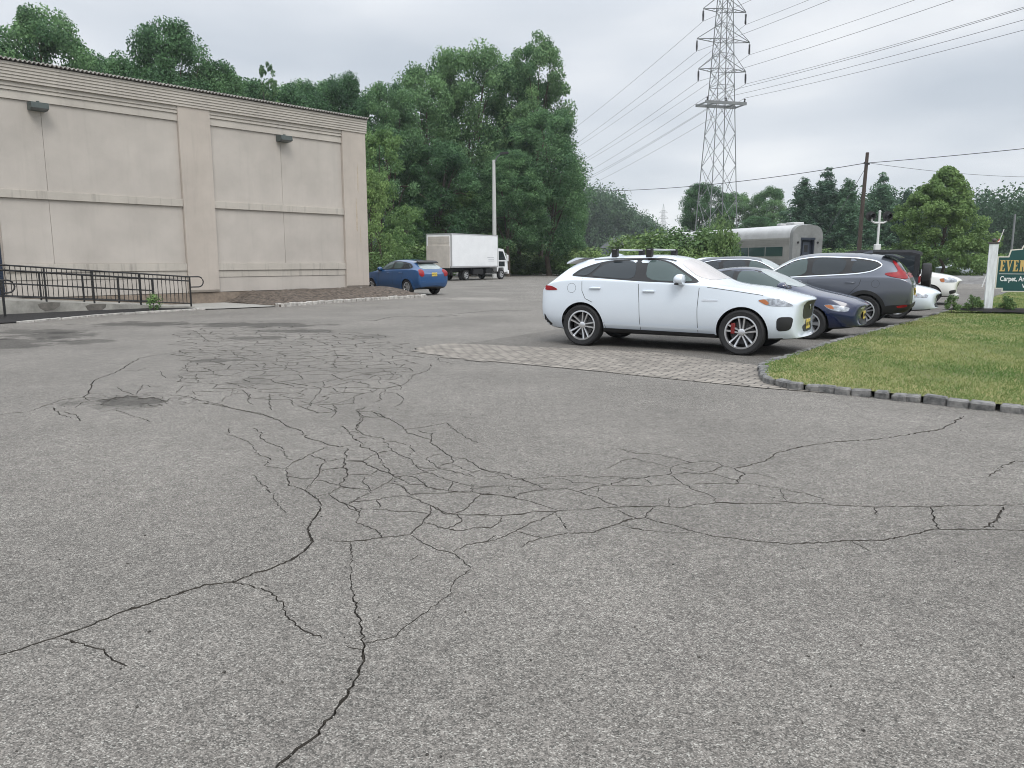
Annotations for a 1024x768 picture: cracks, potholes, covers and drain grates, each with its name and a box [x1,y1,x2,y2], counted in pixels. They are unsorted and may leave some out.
crack [0,326,739,768]
crack [734,416,964,482]
